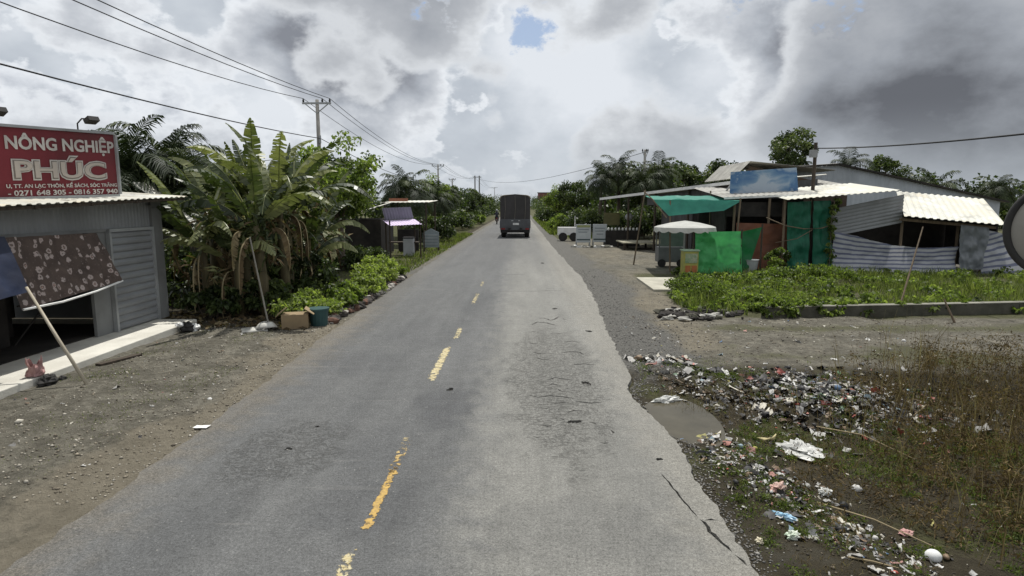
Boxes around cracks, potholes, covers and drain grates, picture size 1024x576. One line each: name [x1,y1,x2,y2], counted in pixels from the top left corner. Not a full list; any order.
crack [662,475,746,565]
crack [530,317,614,444]
